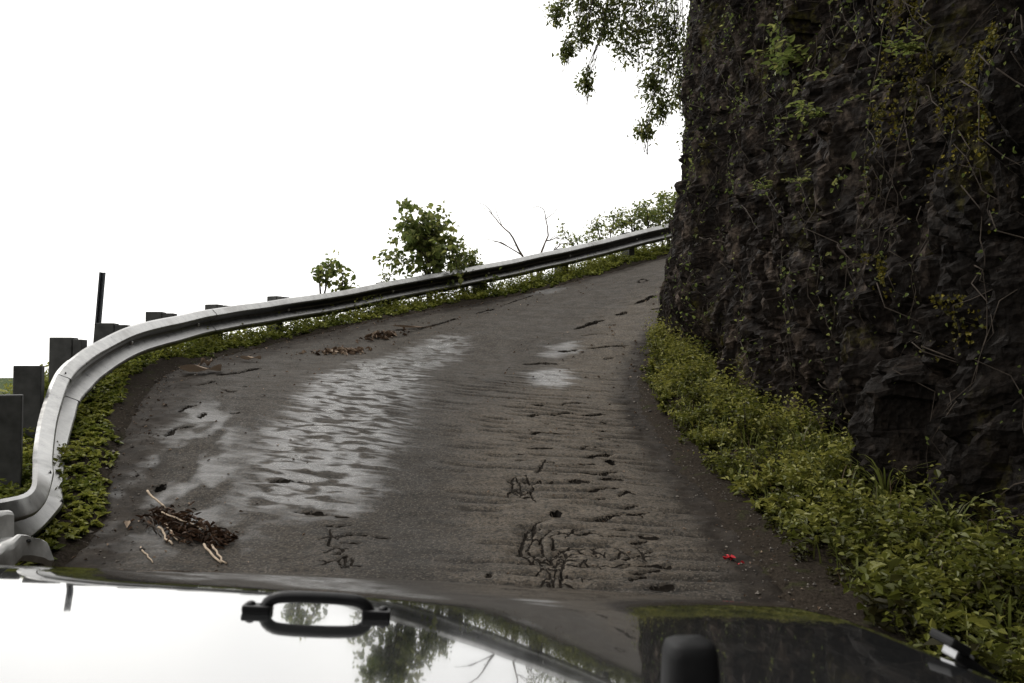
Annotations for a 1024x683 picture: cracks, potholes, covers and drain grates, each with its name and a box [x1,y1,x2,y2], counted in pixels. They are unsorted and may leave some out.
crack [295,511,387,568]
crack [506,402,675,592]
crack [523,279,658,365]
